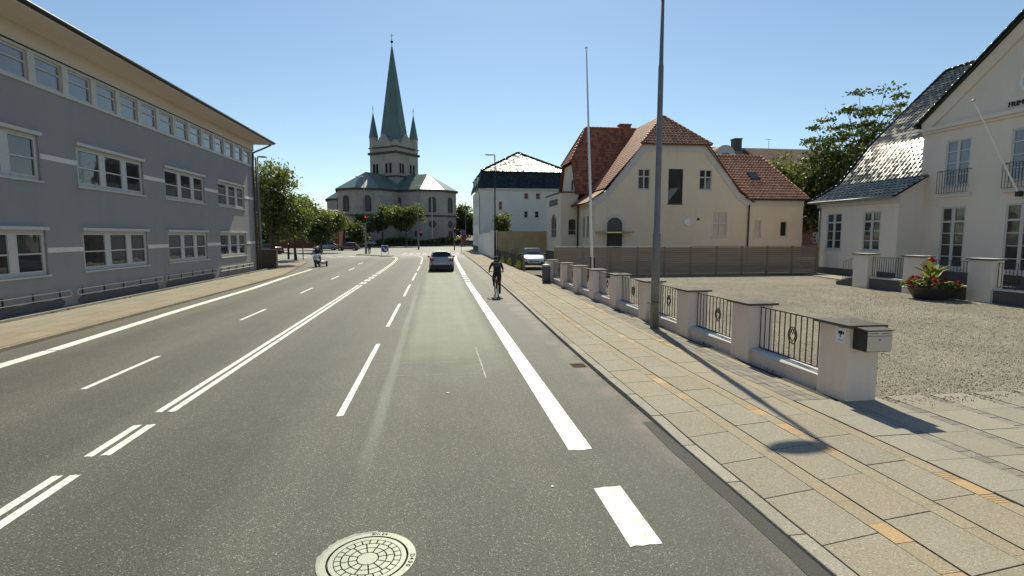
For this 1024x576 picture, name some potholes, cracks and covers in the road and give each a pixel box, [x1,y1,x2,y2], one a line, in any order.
manhole cover [315,531,416,576]
